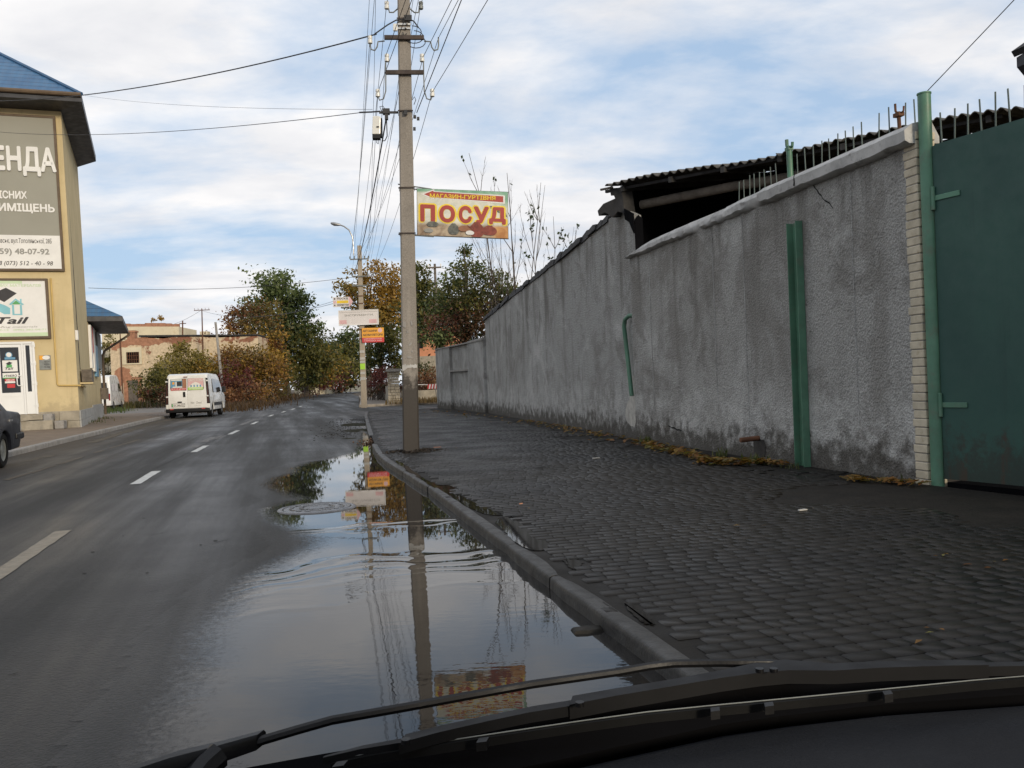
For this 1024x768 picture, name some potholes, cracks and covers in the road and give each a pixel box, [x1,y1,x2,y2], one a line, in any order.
manhole cover [277,502,356,514]
